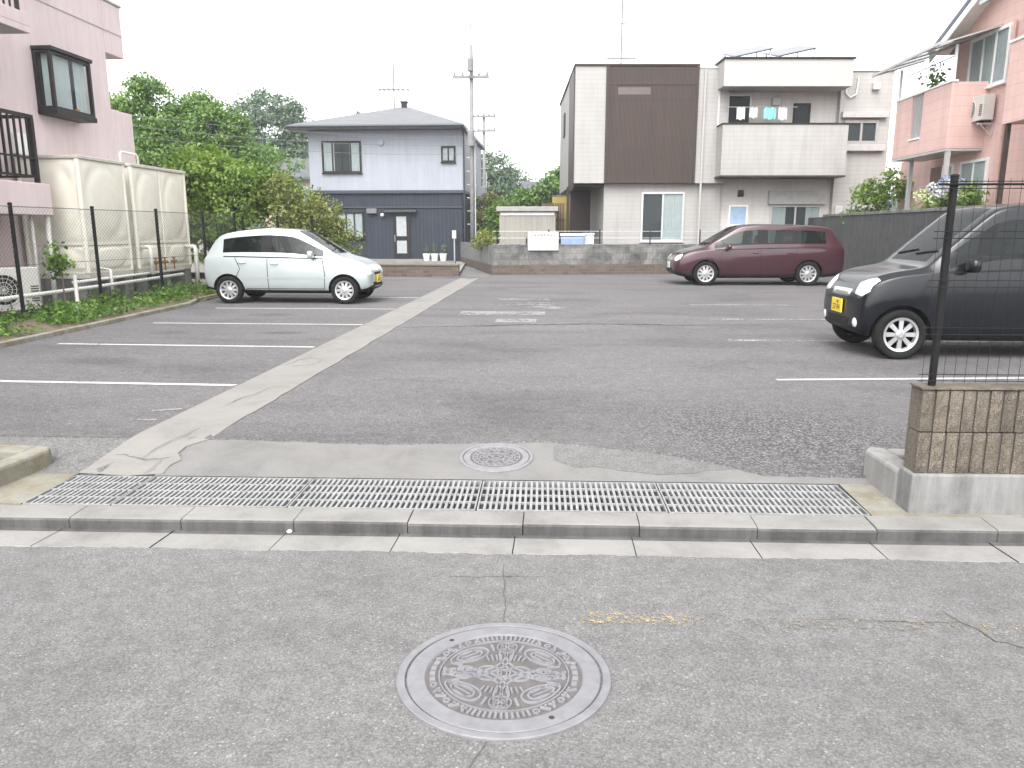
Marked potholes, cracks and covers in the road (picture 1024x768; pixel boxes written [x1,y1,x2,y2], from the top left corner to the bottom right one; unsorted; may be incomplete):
manhole cover [396,623,611,742]
drain grate [656,483,870,517]
drain grate [23,475,154,506]
drain grate [111,476,313,508]
manhole cover [459,443,533,473]
drain grate [288,478,482,511]
drain grate [477,481,668,514]
crack [117,428,199,459]
crack [456,564,543,614]
crack [832,611,1022,647]
